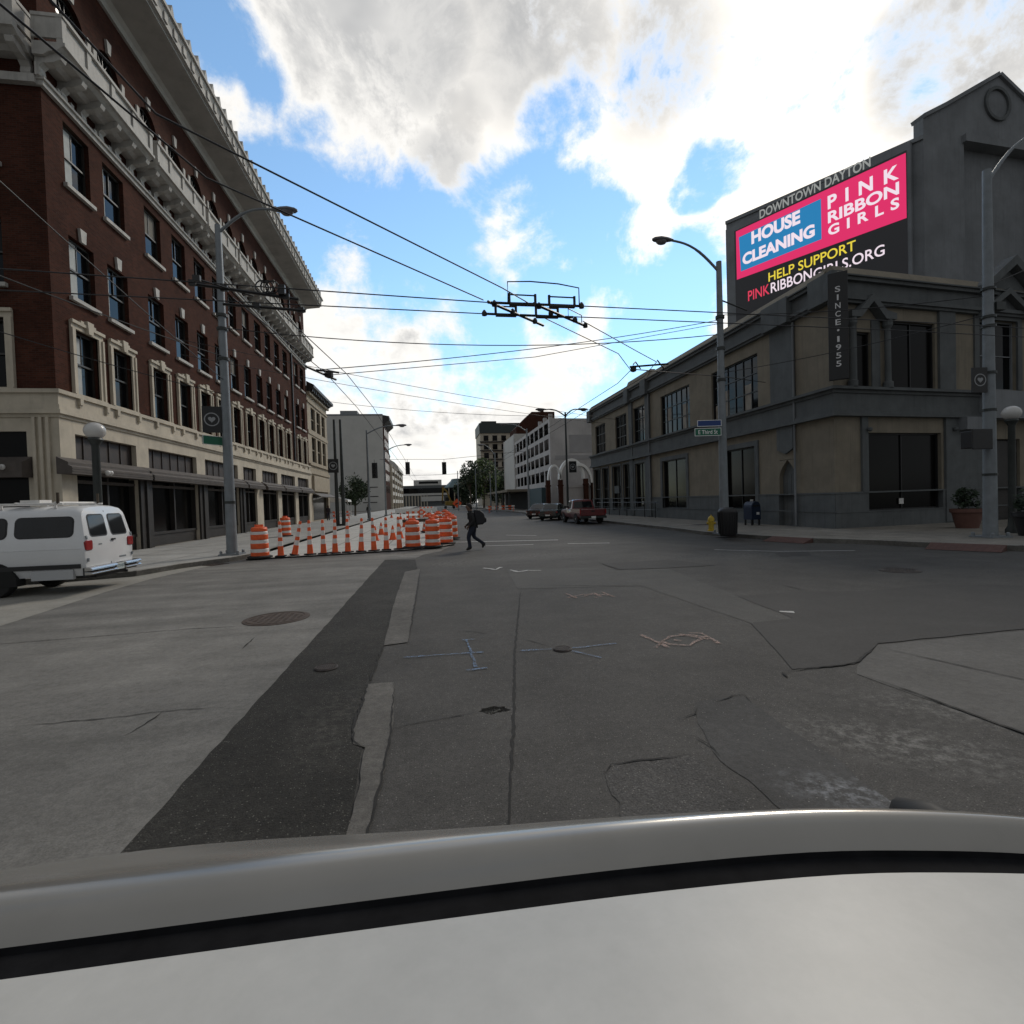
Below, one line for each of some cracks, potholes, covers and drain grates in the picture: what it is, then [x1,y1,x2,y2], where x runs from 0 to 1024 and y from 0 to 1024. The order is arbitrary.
pothole [479,706,510,715]
manhole cover [314,663,338,672]
manhole cover [242,611,310,626]
crack [601,736,718,772]
crack [12,707,222,736]
